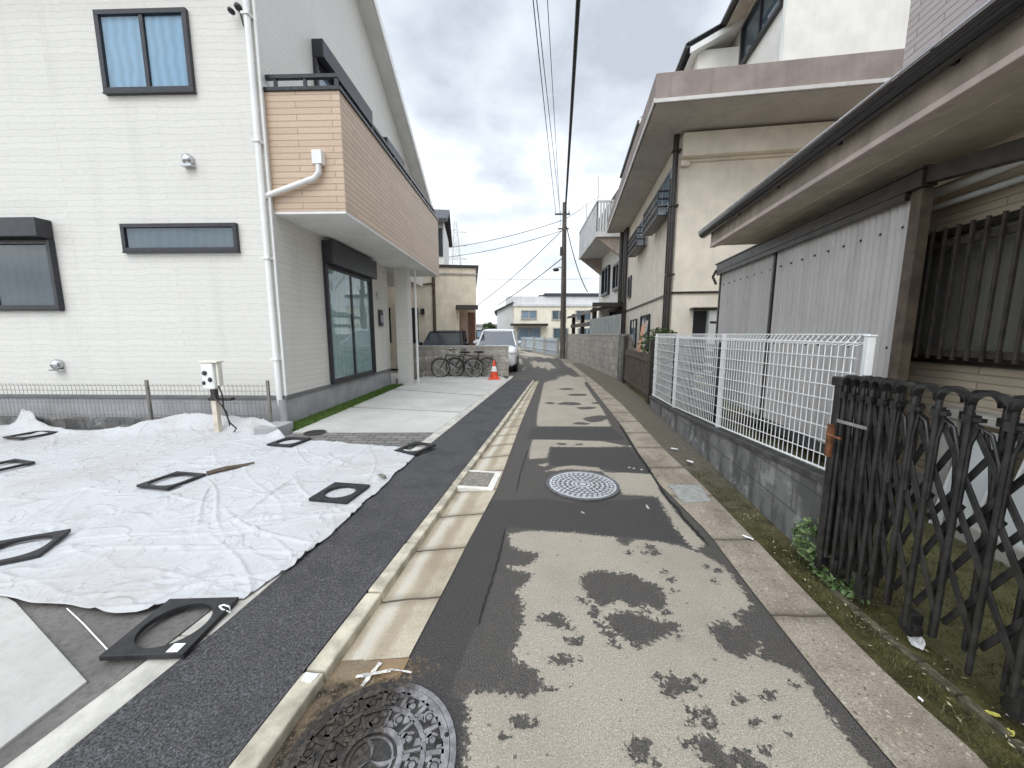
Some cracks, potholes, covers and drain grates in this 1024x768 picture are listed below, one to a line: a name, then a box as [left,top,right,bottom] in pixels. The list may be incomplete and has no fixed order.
manhole cover [281,681,456,768]
manhole cover [546,471,620,501]
drain grate [455,470,502,492]
